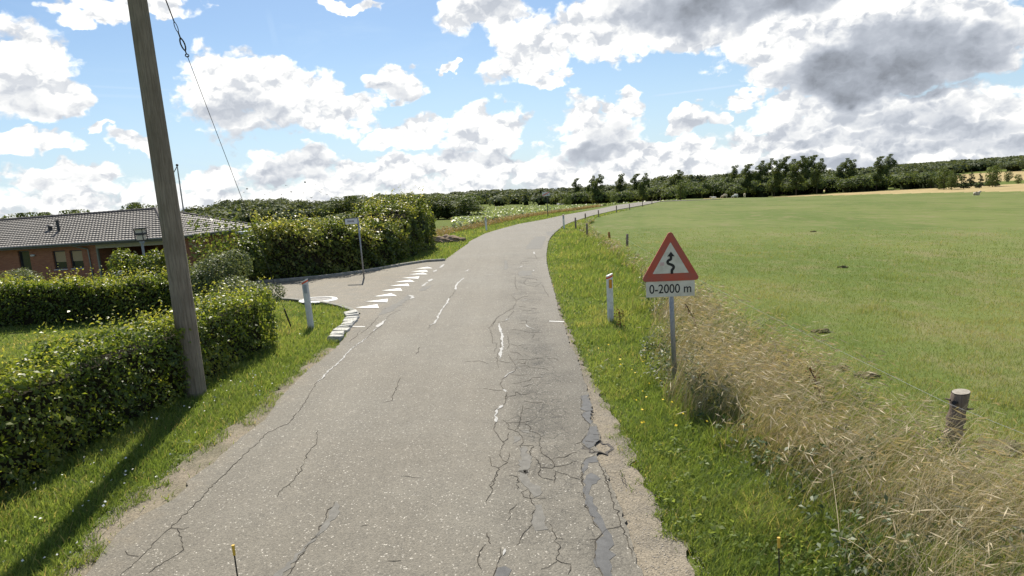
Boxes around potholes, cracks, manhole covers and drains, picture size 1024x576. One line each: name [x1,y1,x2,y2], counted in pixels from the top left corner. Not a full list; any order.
crack [125,313,393,572]
crack [467,252,632,576]
